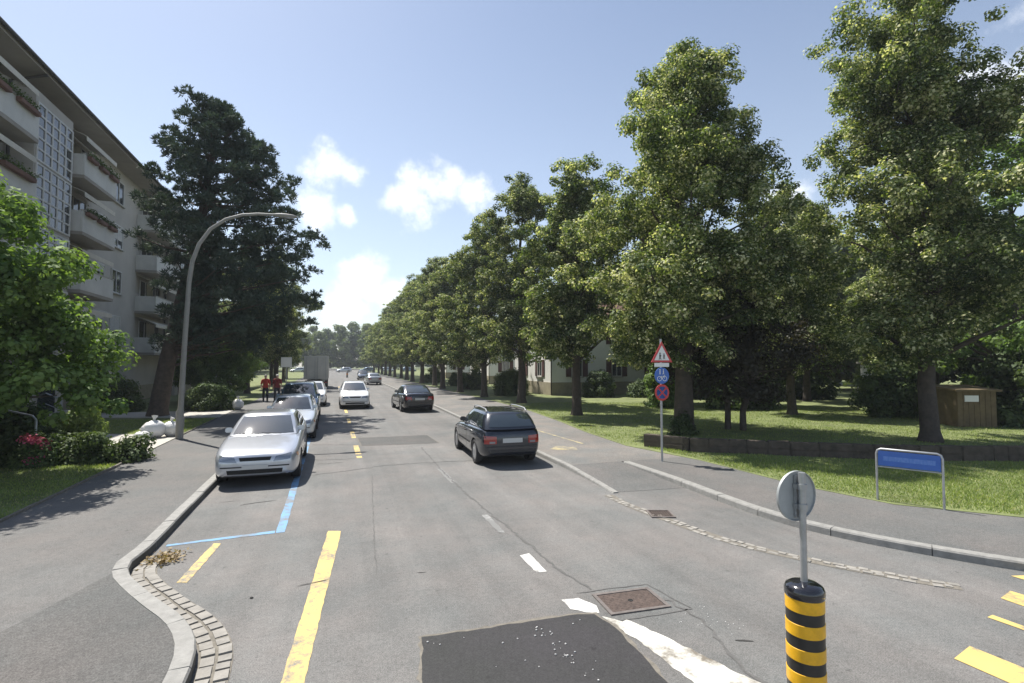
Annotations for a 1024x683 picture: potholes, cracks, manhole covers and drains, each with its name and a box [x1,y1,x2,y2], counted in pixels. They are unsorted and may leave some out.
manhole cover [592,587,671,616]
drain grate [646,510,676,518]
crack [313,444,768,683]
